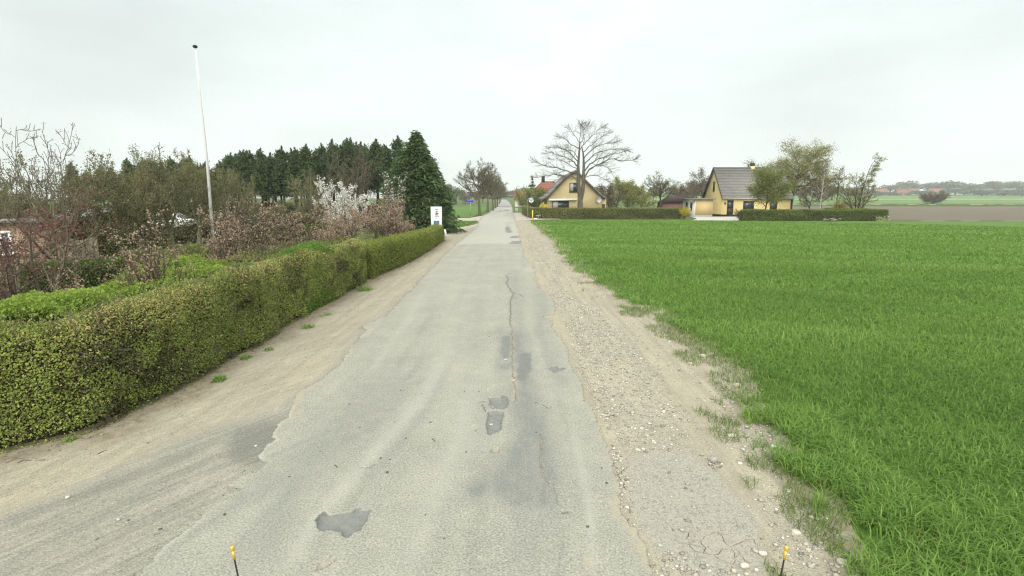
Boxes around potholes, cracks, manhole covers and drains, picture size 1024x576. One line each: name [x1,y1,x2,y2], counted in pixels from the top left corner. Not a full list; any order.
crack [506,273,523,398]
crack [539,436,557,504]
crack [666,531,756,564]
